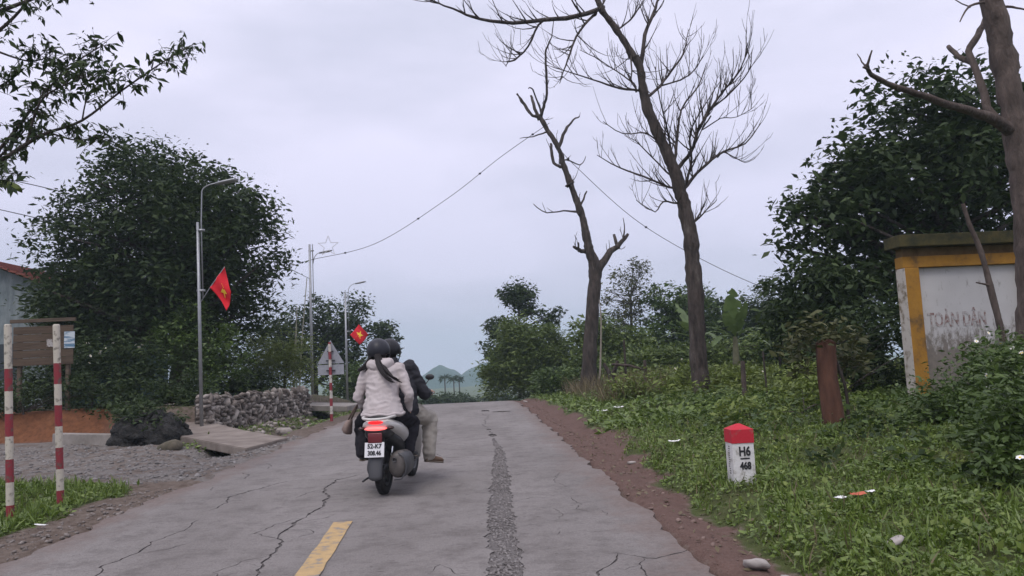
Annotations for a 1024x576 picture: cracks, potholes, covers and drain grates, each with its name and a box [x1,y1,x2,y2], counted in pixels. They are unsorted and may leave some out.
crack [213,475,356,576]
crack [572,550,687,576]
crack [477,414,608,576]
crack [95,465,283,576]
